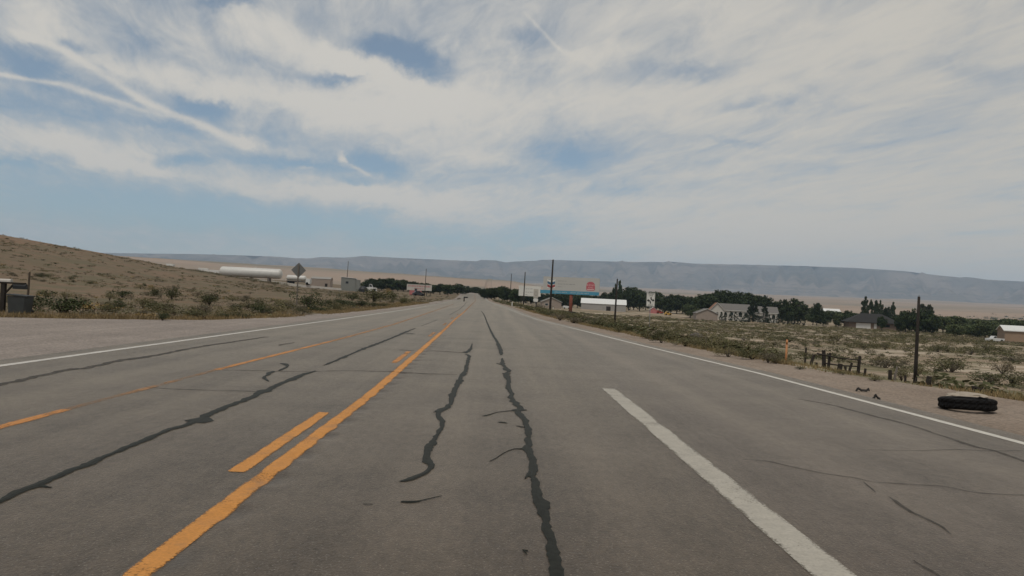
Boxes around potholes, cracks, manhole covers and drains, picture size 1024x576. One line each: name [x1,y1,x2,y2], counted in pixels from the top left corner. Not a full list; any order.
crack [864,482,950,533]
